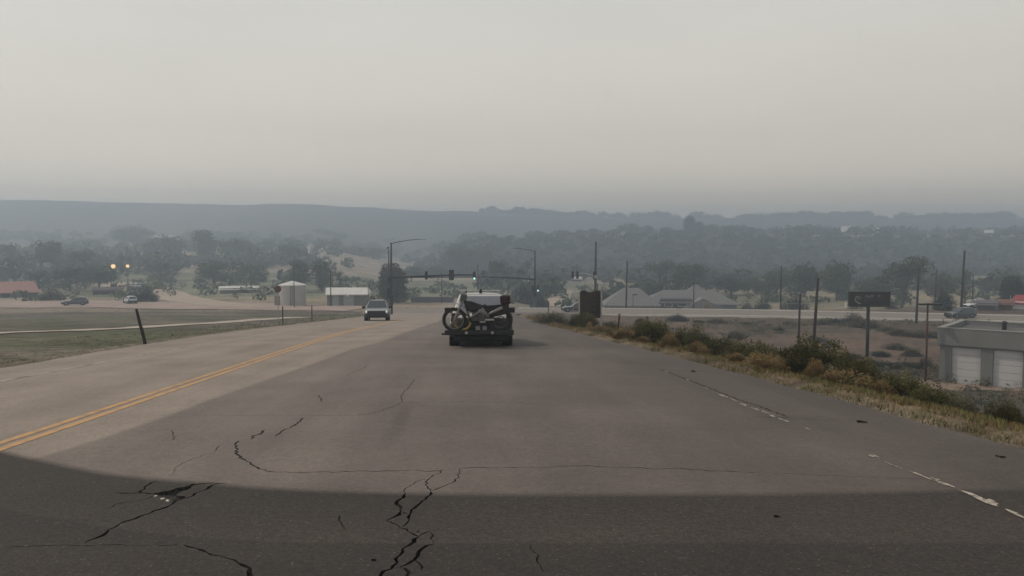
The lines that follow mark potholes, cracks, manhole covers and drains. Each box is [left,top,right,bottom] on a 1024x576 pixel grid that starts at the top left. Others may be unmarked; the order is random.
crack [3,379,930,576]
